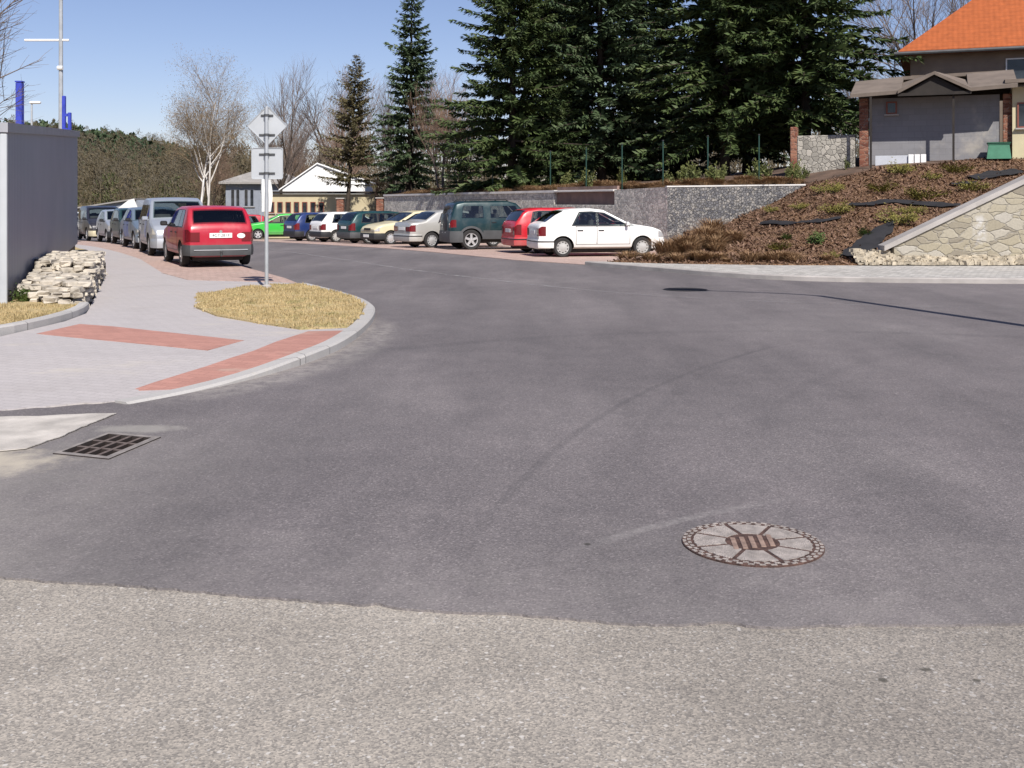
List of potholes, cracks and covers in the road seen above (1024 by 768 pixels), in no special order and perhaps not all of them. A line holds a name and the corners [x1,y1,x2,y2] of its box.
drain grate [53,432,161,460]
manhole cover [682,521,825,568]
